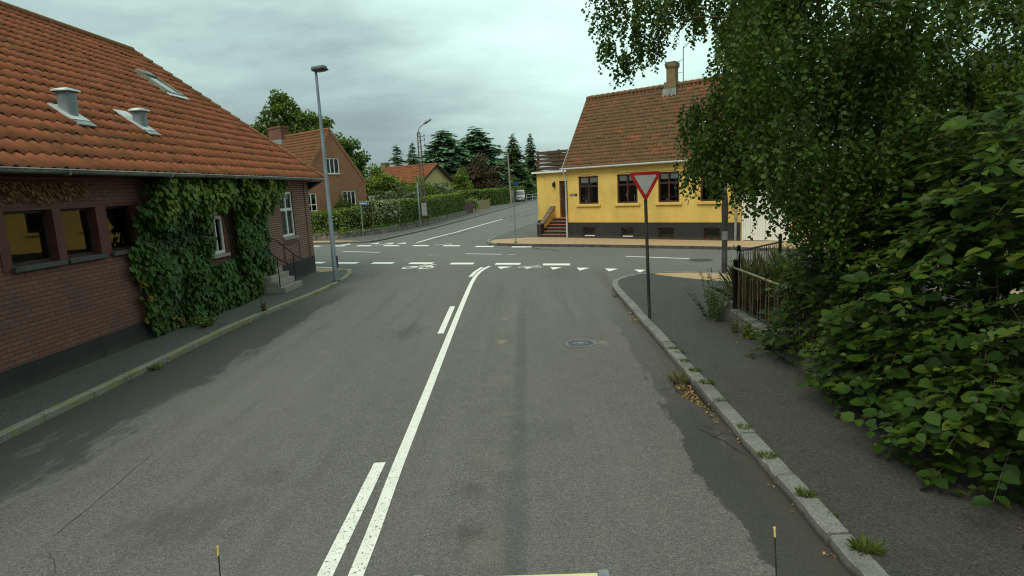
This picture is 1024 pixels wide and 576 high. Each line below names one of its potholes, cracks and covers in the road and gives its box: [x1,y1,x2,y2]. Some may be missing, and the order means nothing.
manhole cover [565,339,596,347]
crack [56,455,152,534]
crack [699,426,750,458]
